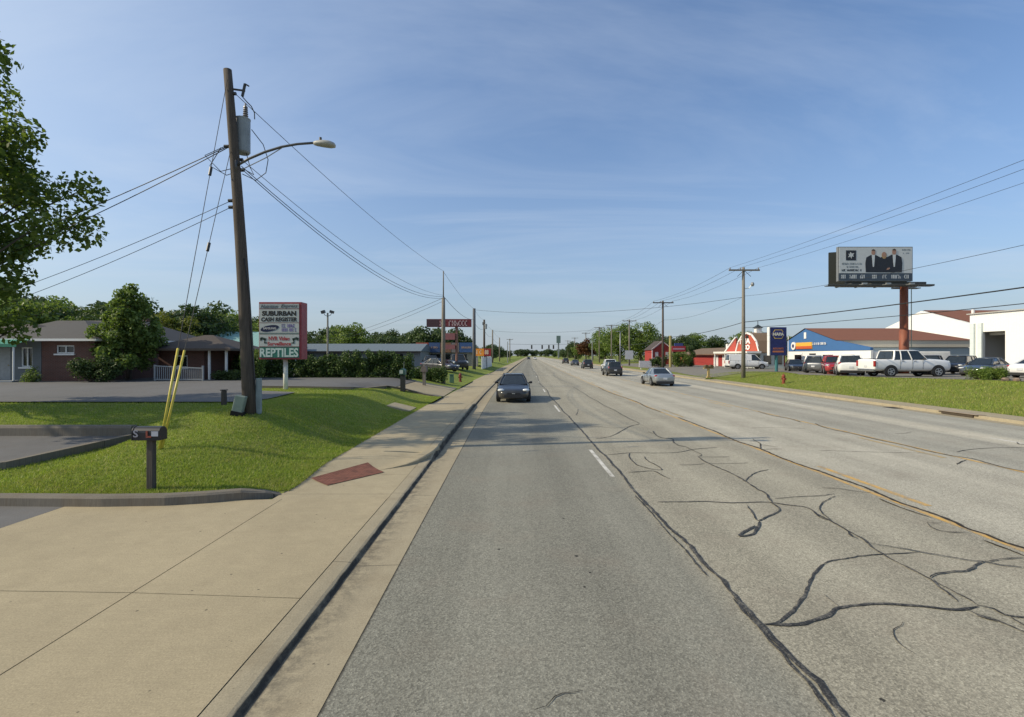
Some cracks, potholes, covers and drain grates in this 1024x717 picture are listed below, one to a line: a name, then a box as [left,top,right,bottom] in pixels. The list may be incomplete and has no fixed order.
crack [658,494,1024,618]
